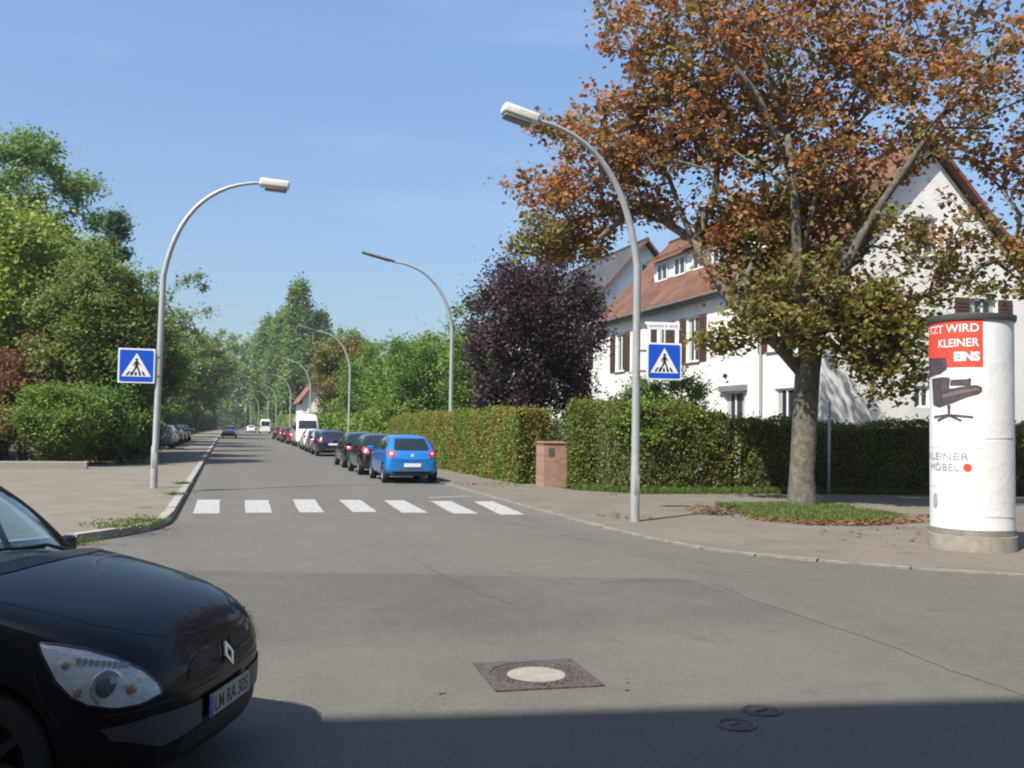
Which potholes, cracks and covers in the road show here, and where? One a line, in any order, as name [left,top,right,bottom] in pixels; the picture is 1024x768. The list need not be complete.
manhole cover [473,658,605,692]
utility cover [716,718,757,732]
utility cover [742,704,781,717]
